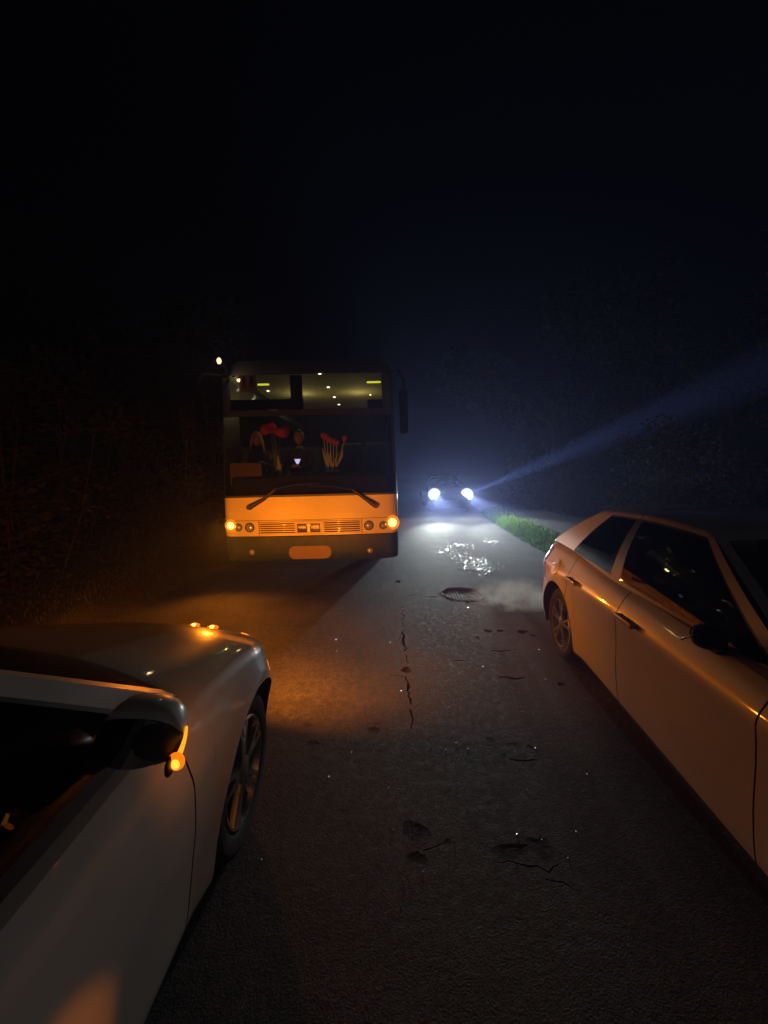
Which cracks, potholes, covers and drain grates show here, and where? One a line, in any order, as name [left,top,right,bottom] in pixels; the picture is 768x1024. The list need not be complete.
pothole [490,844,529,861]
pothole [402,820,432,842]
manhole cover [439,587,485,601]
pothole [525,836,555,862]
pothole [405,851,428,864]
